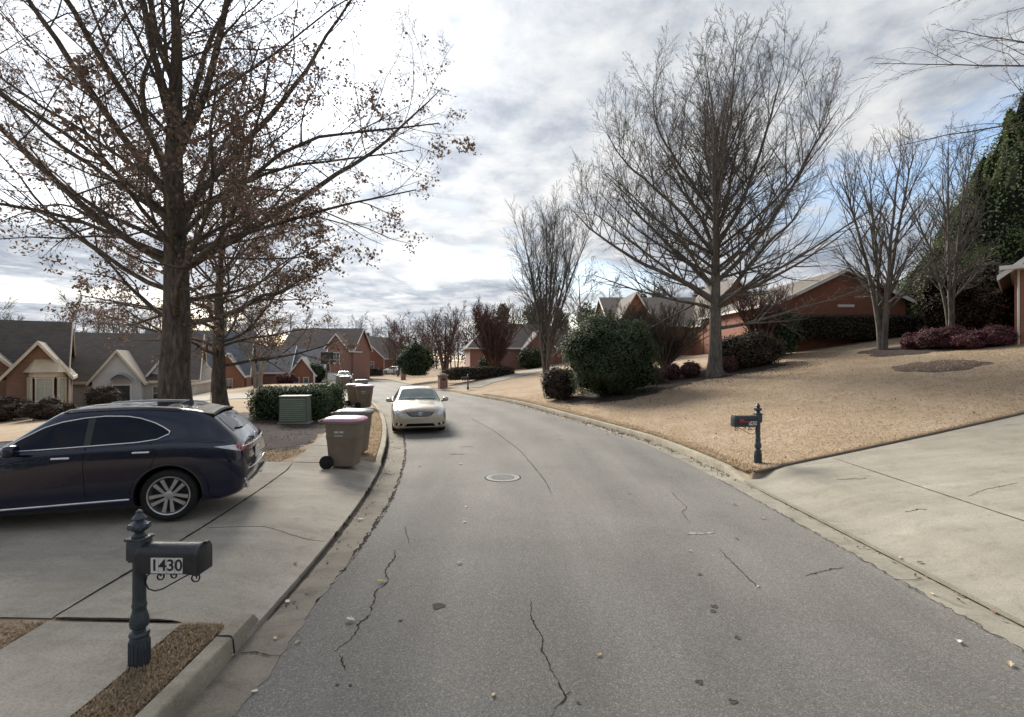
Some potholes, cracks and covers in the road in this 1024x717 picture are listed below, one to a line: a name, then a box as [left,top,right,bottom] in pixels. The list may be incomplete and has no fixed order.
crack [335,531,409,671]
crack [530,604,571,717]
manhole cover [484,473,521,482]
